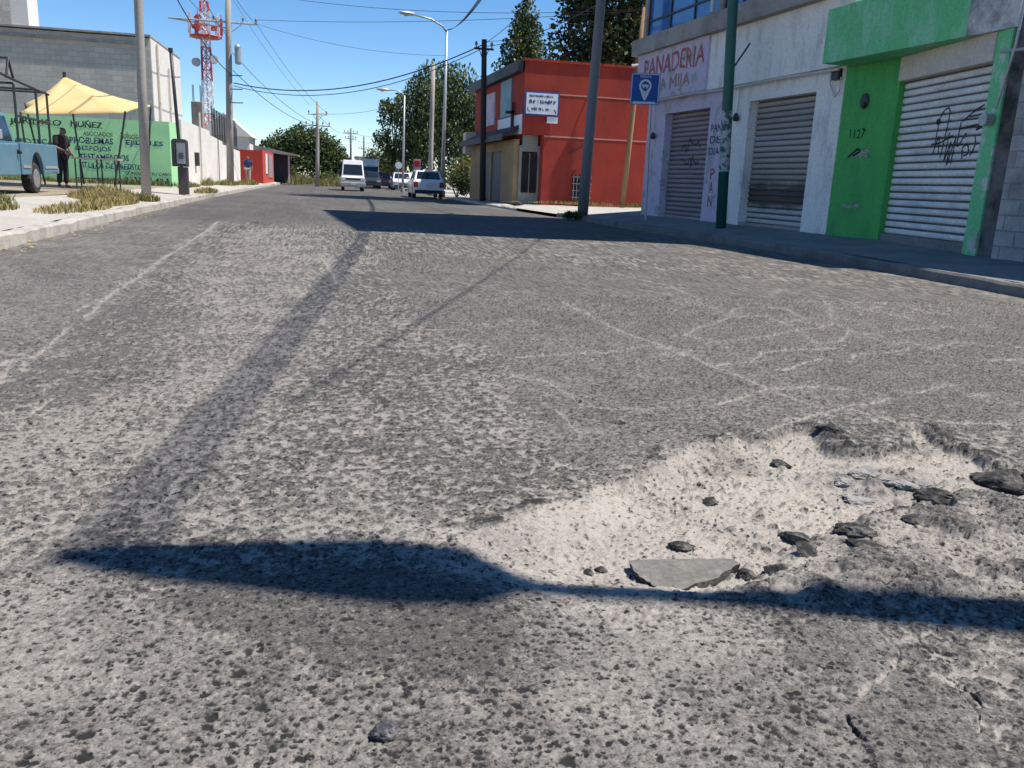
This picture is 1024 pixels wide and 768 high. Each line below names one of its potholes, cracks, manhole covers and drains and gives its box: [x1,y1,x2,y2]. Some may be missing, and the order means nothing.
crack [845,626,902,742]
crack [953,653,1009,733]
crack [916,384,1016,397]
pothole [445,421,1024,607]
crack [510,273,993,434]
